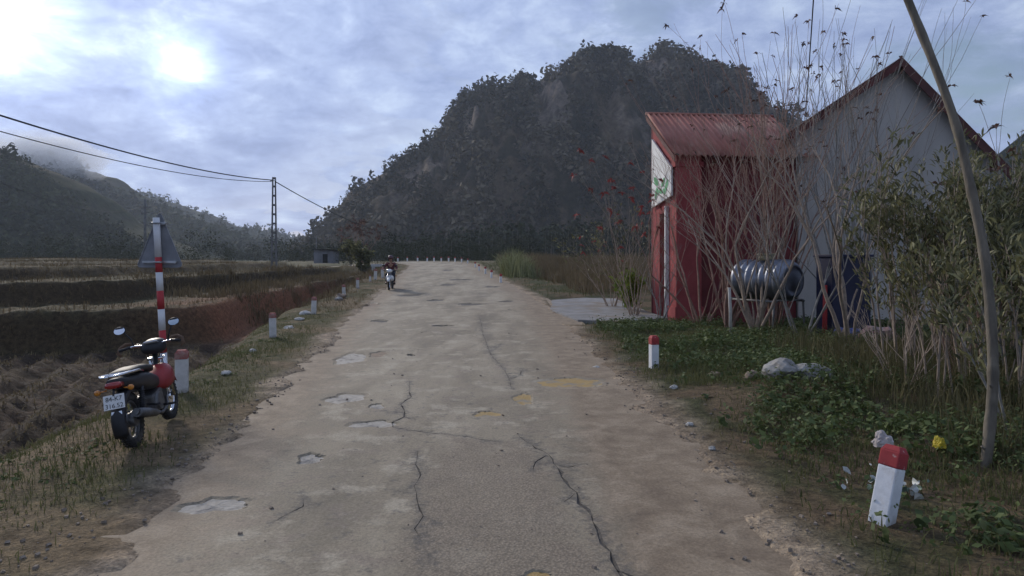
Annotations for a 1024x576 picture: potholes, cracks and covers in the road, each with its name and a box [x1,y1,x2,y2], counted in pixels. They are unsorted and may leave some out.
pothole [343,419,401,428]
pothole [170,496,254,515]
crack [391,381,492,441]
pothole [332,352,369,365]
pothole [320,392,369,404]
crack [519,436,632,576]
pothole [296,452,327,464]
